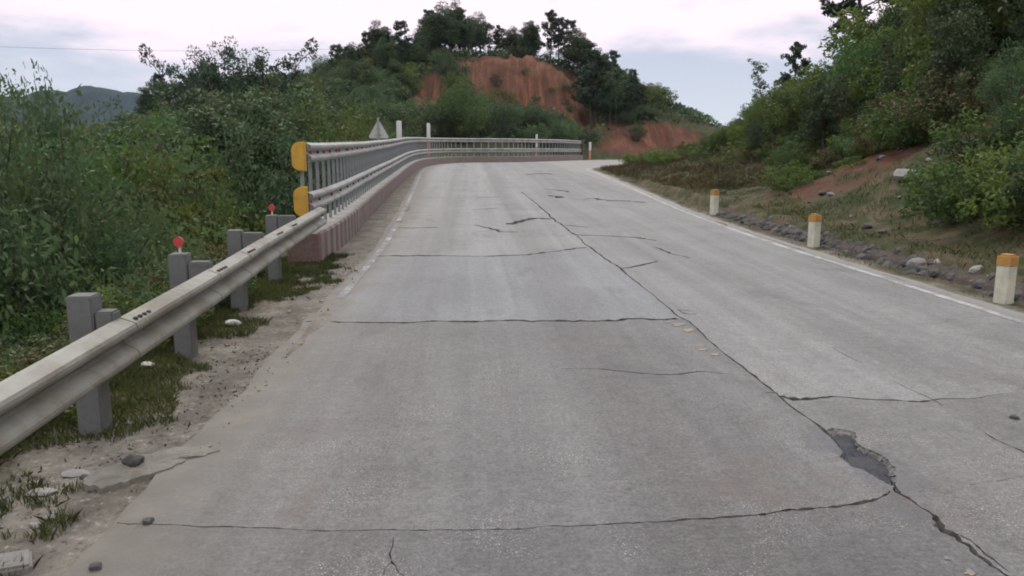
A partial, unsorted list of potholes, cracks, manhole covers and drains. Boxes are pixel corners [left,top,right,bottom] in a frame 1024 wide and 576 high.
pothole [827,428,897,486]
crack [117,477,1009,576]
crack [305,173,1003,444]
